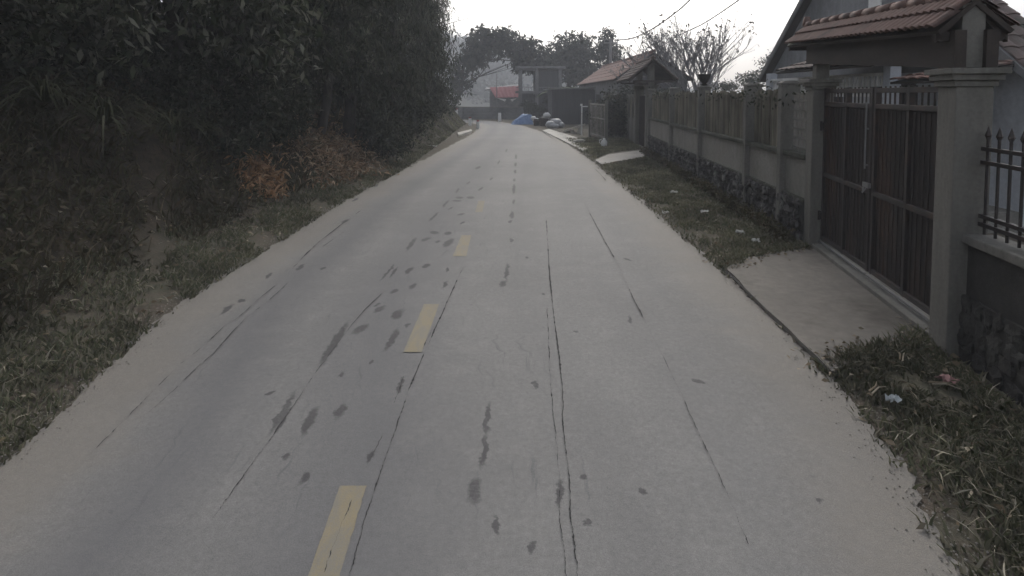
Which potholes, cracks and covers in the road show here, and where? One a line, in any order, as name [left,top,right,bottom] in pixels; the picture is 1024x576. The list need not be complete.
crack [546,221,578,576]
crack [96,211,360,448]
crack [220,293,382,509]
crack [588,210,749,544]
crack [324,270,462,573]
